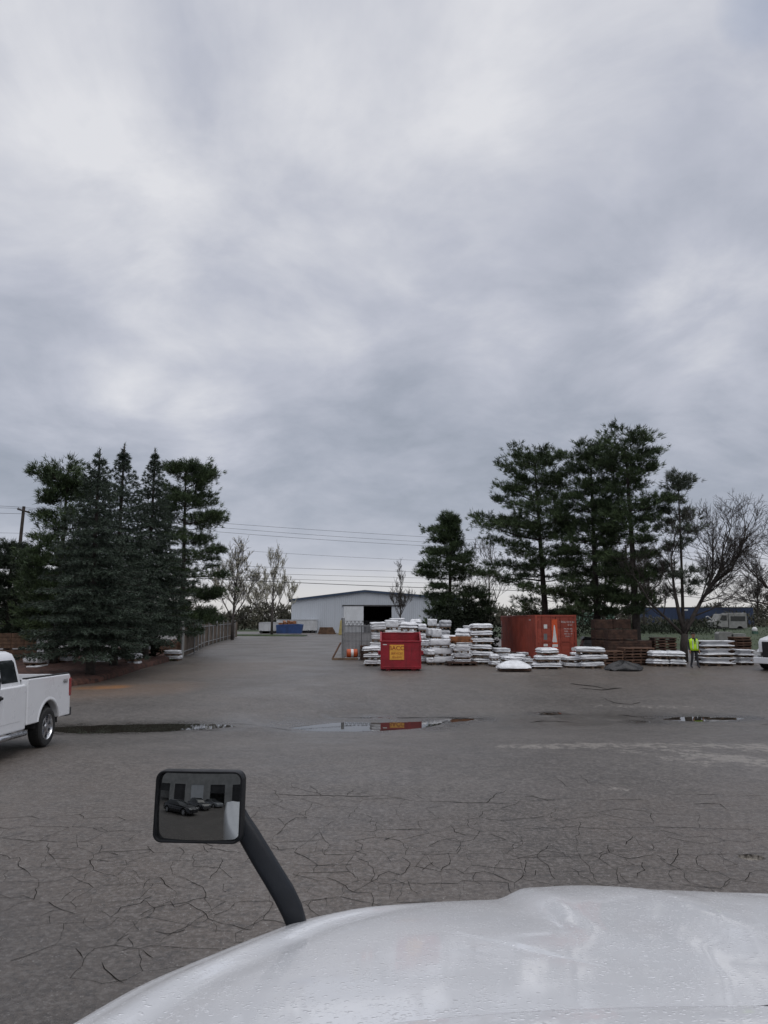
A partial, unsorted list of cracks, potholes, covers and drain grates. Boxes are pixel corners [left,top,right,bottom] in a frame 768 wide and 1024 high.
crack [0,811,283,984]
crack [239,774,768,916]
crack [571,683,650,719]
